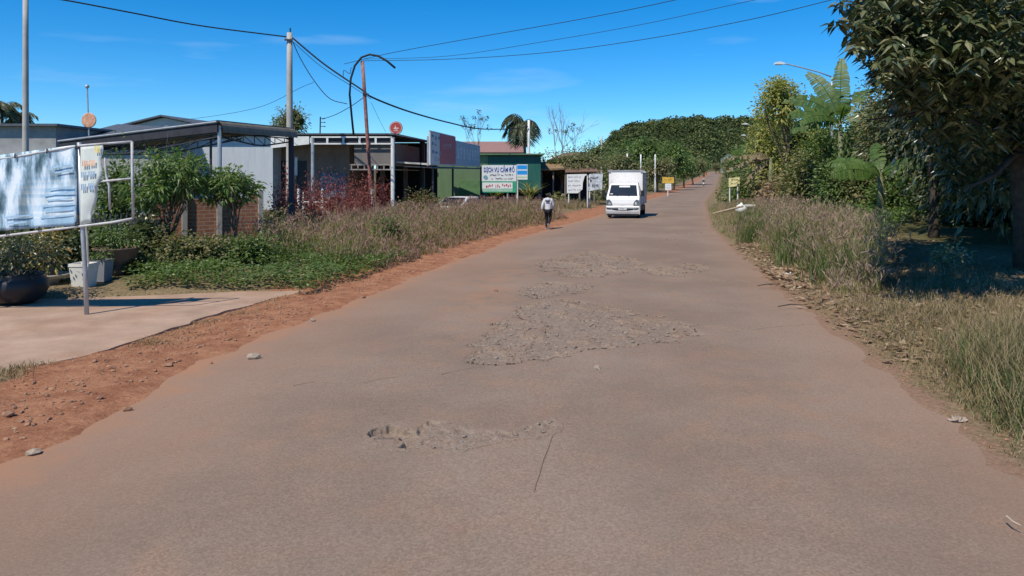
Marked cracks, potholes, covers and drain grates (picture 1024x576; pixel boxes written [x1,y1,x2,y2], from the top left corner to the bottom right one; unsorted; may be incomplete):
crack [534,436,553,492]
pothole [517,281,594,299]
pothole [464,298,706,366]
pothole [638,263,711,276]
pothole [361,416,563,453]
pothole [537,251,647,278]
